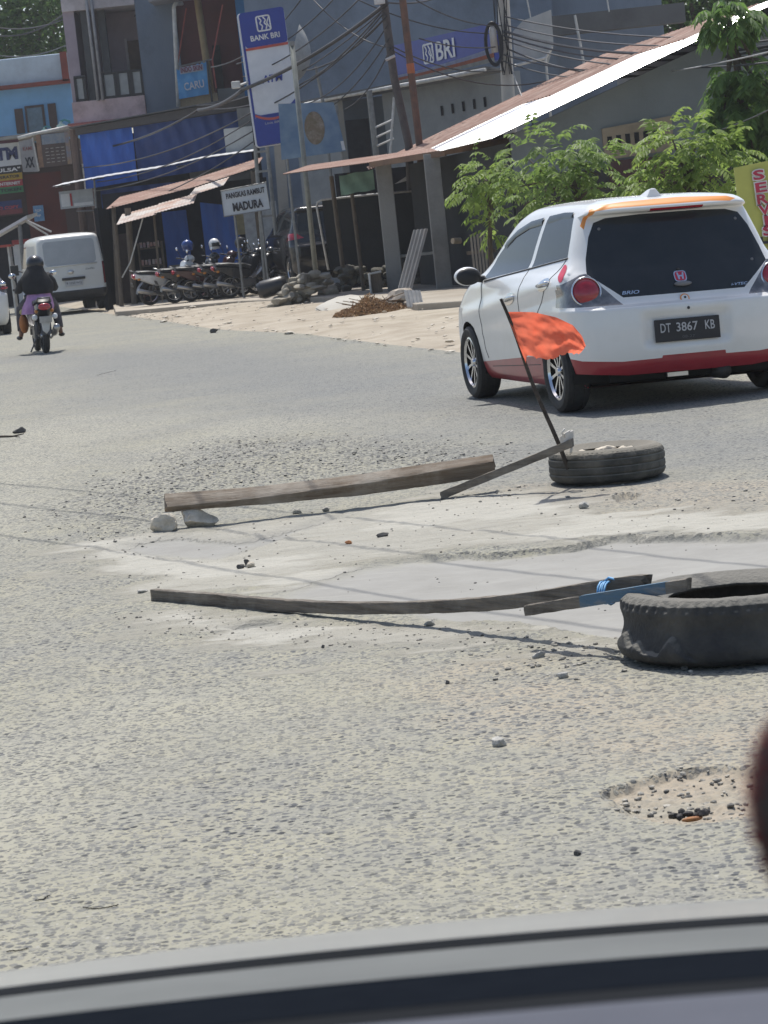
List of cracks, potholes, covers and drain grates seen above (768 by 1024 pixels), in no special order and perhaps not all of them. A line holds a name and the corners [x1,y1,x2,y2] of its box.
pothole [598,765,751,824]
